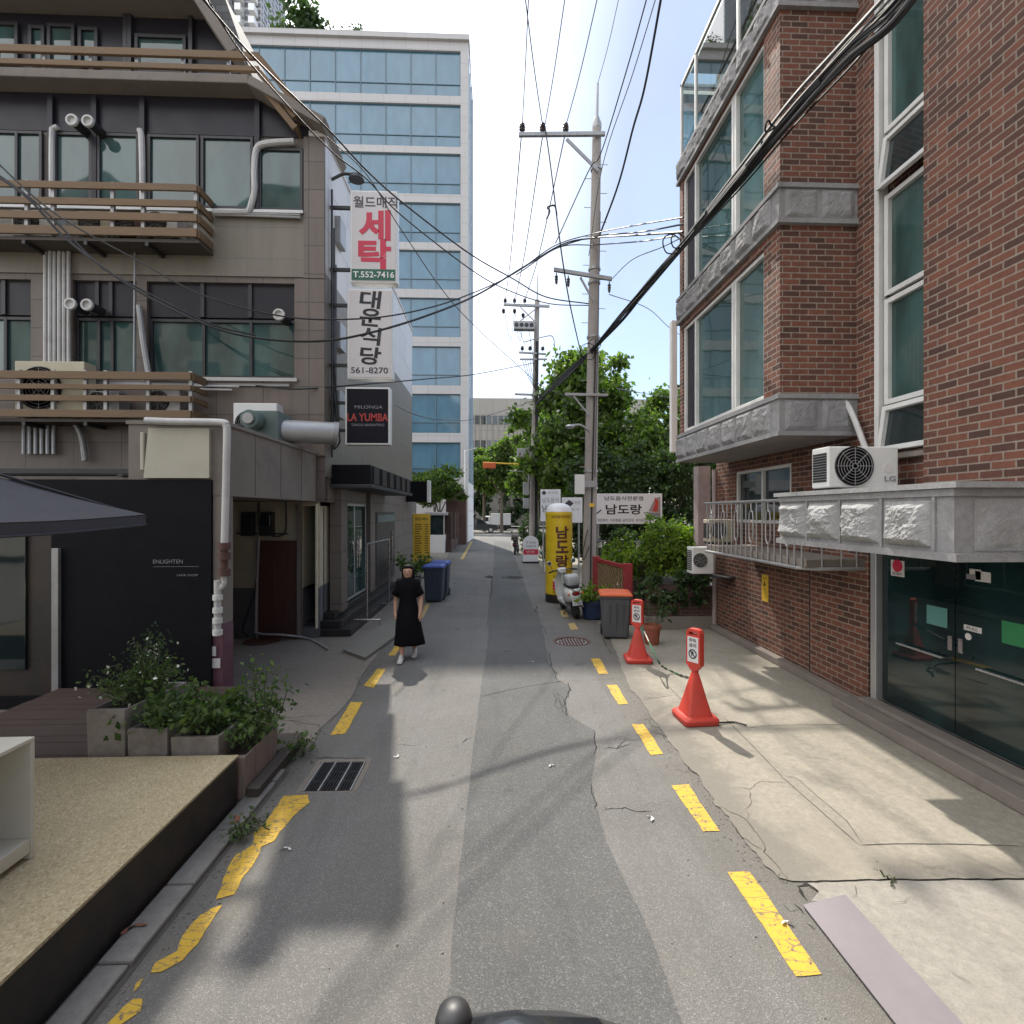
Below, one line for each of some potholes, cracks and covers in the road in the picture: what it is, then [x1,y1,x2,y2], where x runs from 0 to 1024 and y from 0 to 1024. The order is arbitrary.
drain grate [296,758,372,793]
manhole cover [553,637,591,646]
crack [726,781,1007,981]
